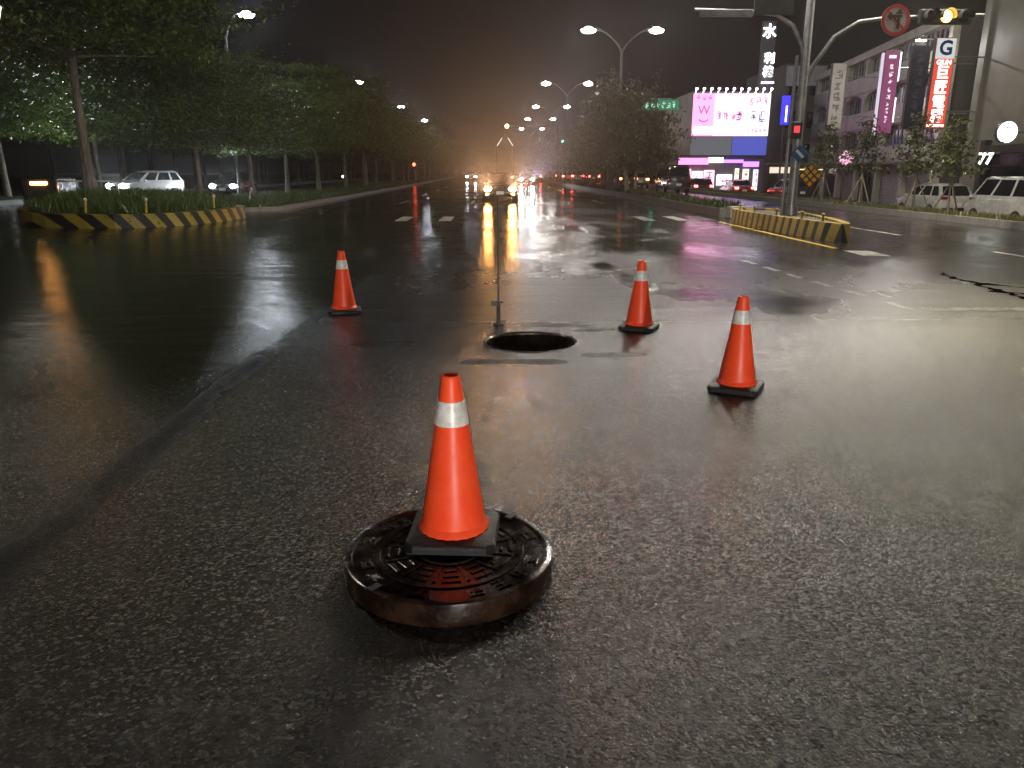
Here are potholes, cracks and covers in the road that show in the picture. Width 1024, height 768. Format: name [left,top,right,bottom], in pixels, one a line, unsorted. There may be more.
manhole cover [343,507,553,628]
crack [937,271,1024,299]
manhole cover [483,331,579,352]
